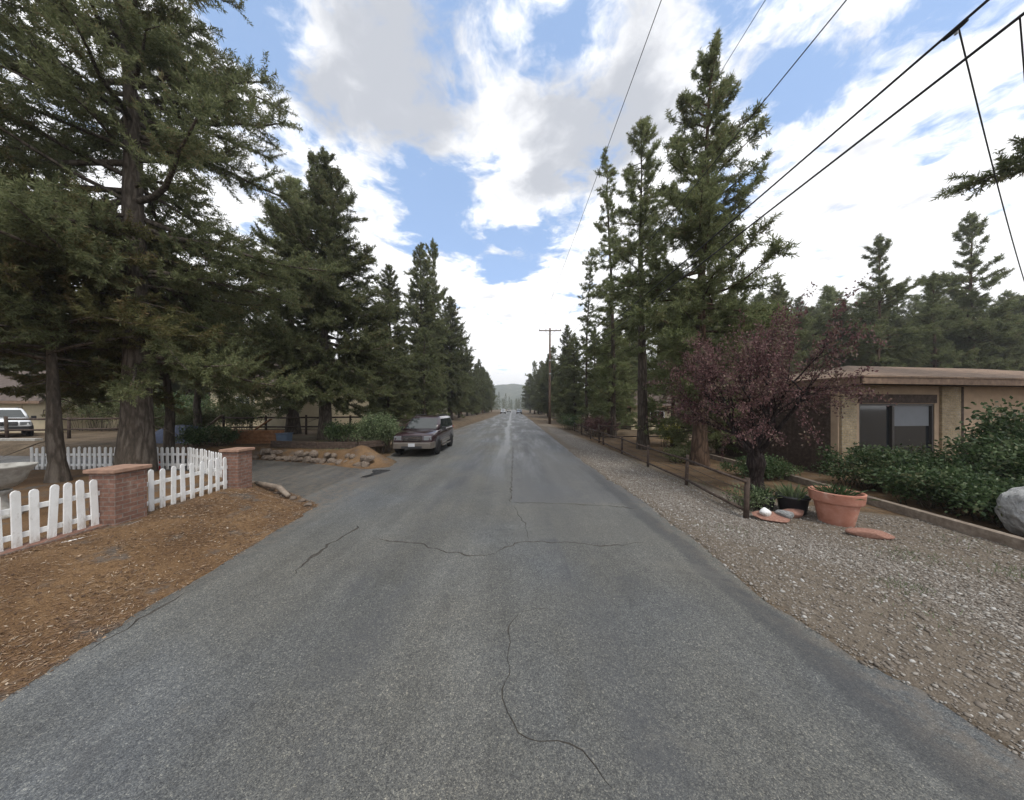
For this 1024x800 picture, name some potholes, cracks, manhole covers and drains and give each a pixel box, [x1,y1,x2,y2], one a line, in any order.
crack [501,608,612,788]
crack [293,526,359,576]
crack [382,507,635,556]
crack [89,594,182,651]
